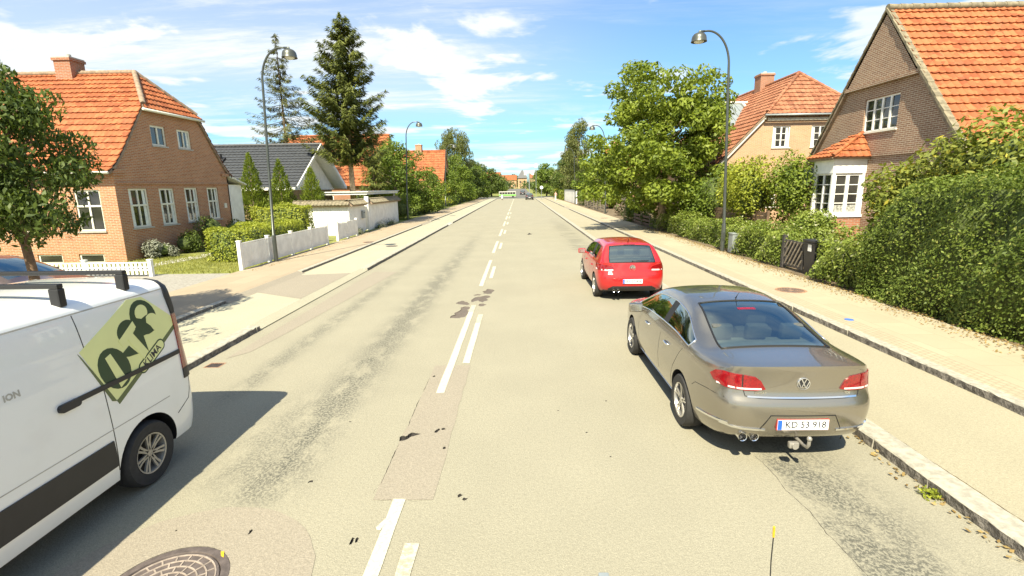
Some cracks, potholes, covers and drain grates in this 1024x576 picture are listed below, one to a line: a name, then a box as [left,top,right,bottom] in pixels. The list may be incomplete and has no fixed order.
manhole cover [121,546,230,576]
pothole [450,306,470,318]
